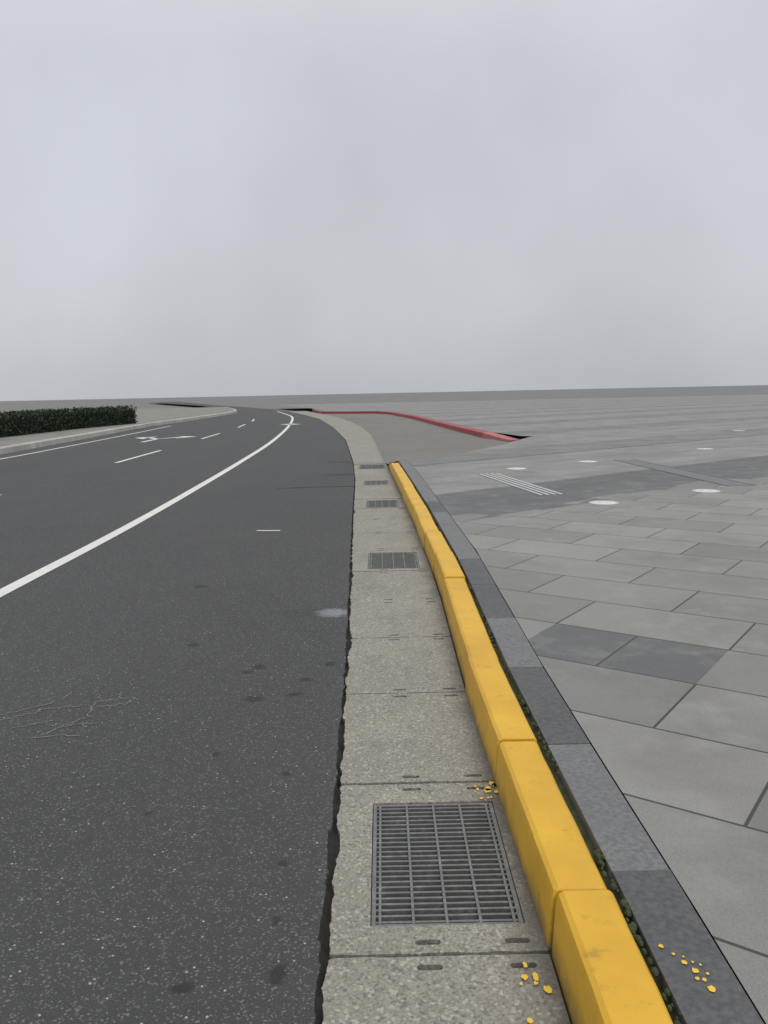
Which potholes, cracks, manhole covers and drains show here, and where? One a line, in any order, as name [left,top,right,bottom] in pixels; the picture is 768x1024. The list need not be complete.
drain grate [366,500,399,508]
